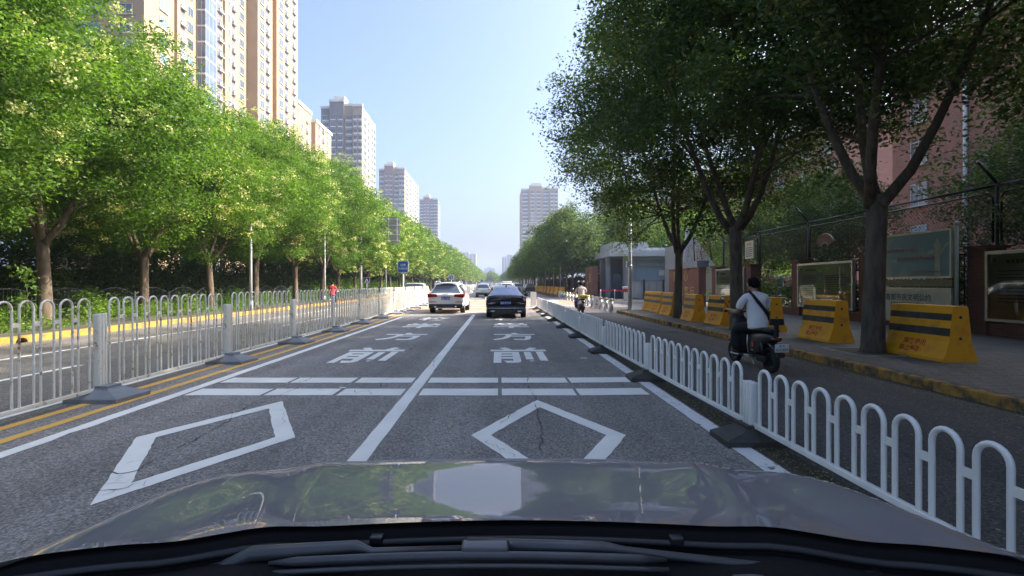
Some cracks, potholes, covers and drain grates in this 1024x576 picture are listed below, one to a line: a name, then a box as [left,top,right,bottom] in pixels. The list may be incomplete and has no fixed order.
crack [526,373,545,454]
